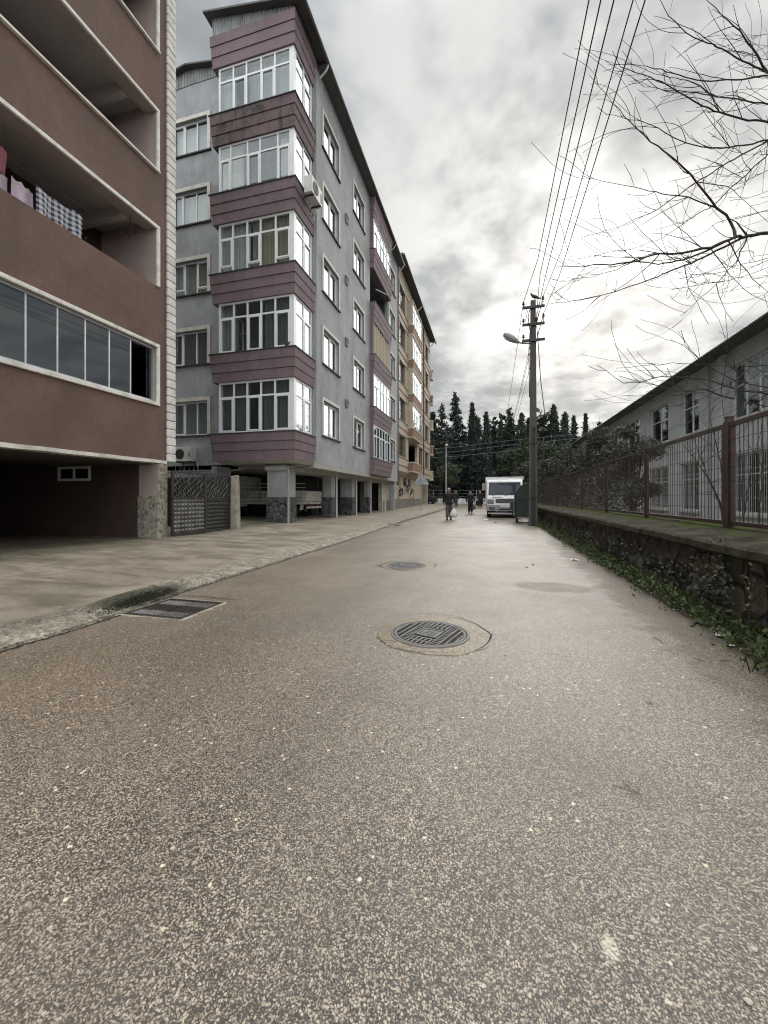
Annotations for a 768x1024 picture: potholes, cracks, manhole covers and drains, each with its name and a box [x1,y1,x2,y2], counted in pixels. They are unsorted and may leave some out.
manhole cover [380,561,436,571]
manhole cover [377,616,491,656]
drain grate [120,598,228,621]
